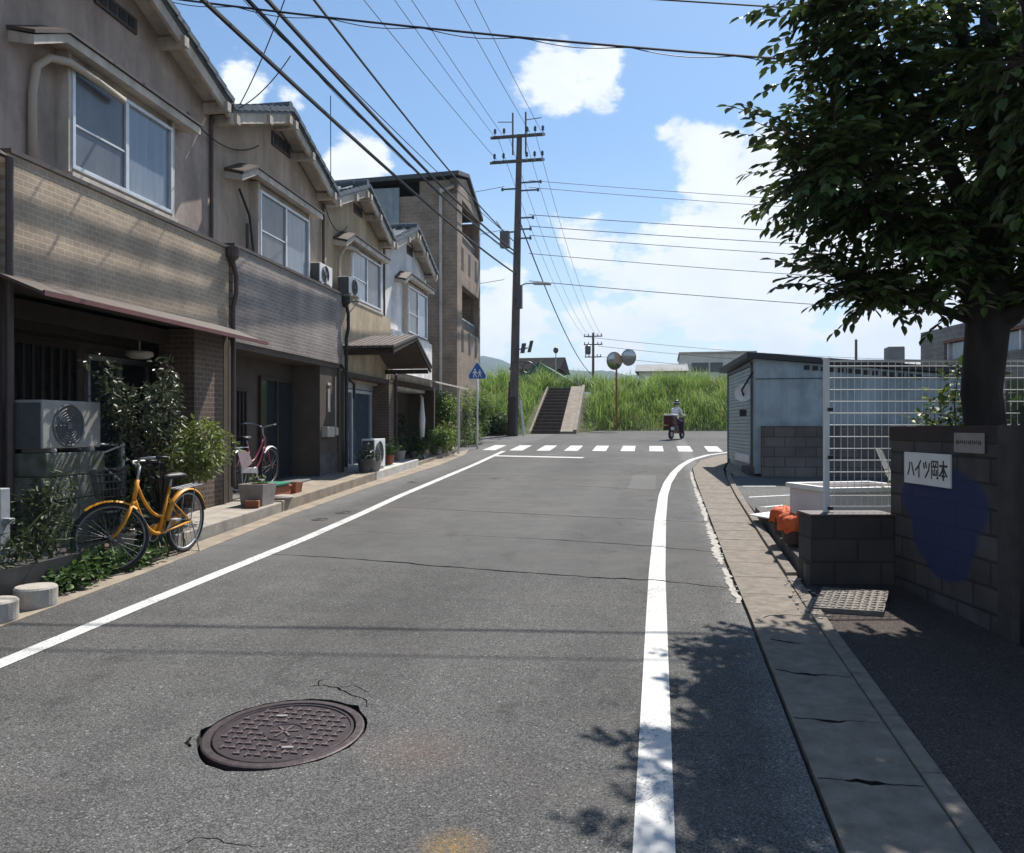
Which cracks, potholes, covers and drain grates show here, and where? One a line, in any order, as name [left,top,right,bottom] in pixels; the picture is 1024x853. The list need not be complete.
crack [274,554,728,588]
manhole cover [200,700,365,772]
crack [174,837,258,851]
